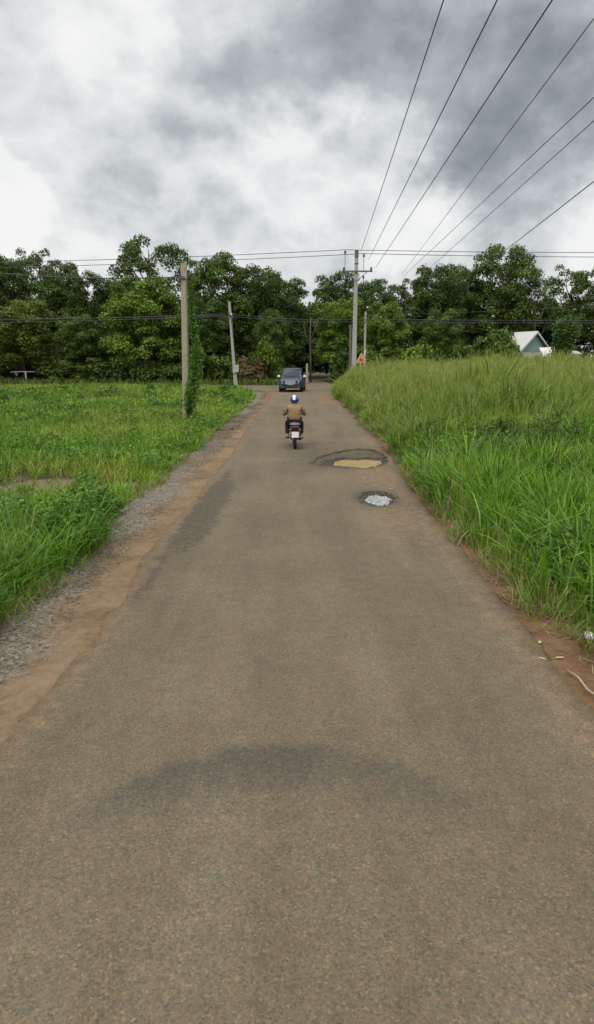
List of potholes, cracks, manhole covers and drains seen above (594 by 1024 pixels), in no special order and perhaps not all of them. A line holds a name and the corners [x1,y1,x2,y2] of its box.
pothole [359,491,398,506]
pothole [306,446,388,470]
